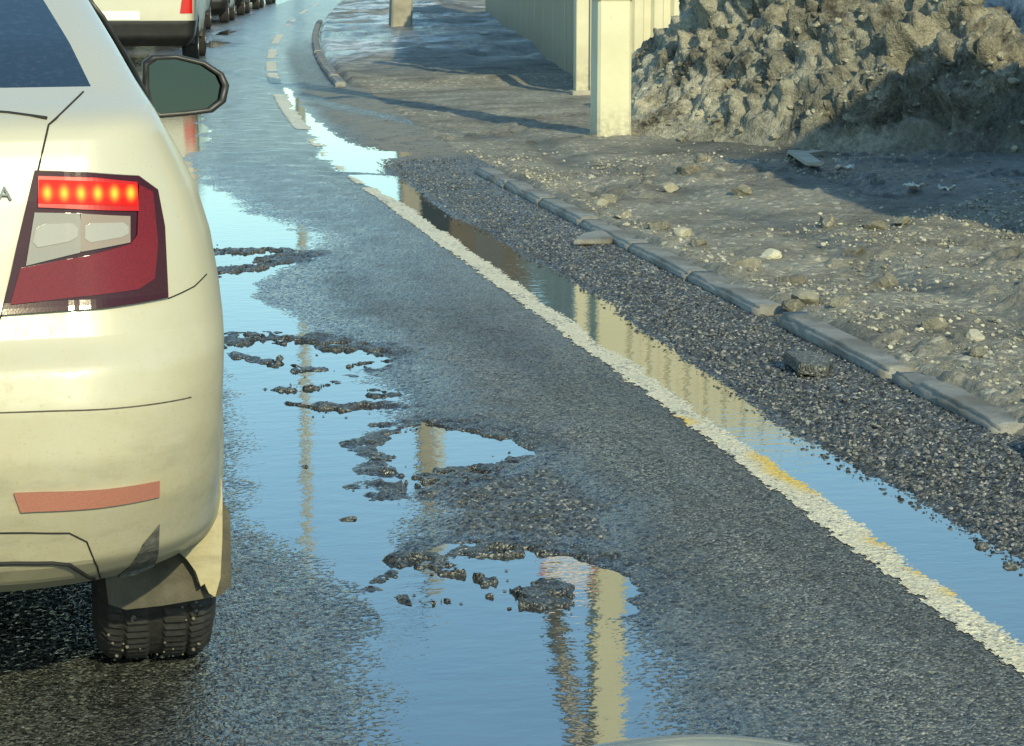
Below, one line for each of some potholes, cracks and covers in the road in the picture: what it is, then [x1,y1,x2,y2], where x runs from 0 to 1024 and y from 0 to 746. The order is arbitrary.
pothole [341,525,682,632]
pothole [339,412,573,500]
pothole [213,247,319,277]
pothole [263,370,429,420]
pothole [224,328,425,379]
